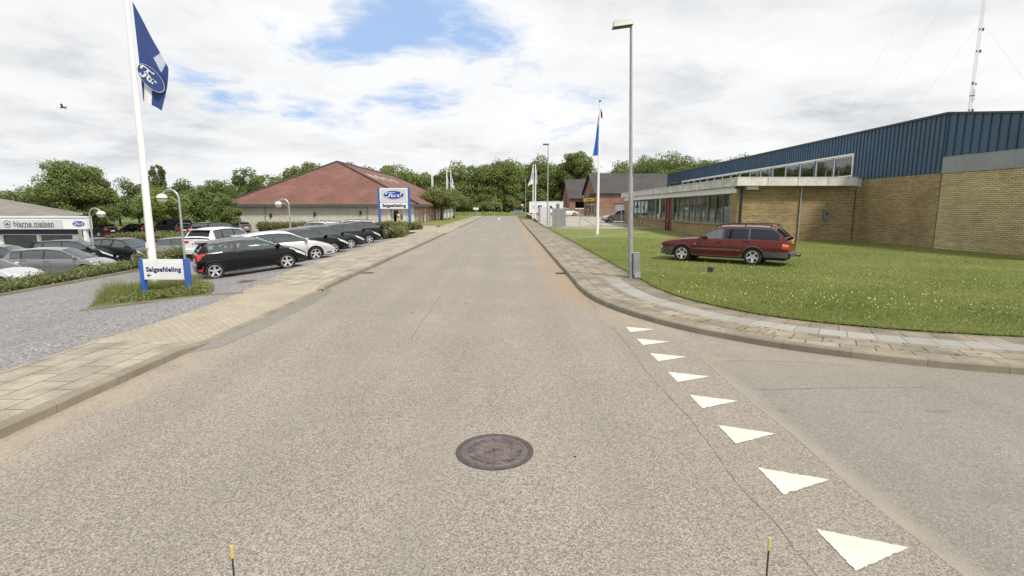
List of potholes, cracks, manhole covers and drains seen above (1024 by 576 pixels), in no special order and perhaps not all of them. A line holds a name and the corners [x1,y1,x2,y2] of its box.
manhole cover [456,434,533,470]
